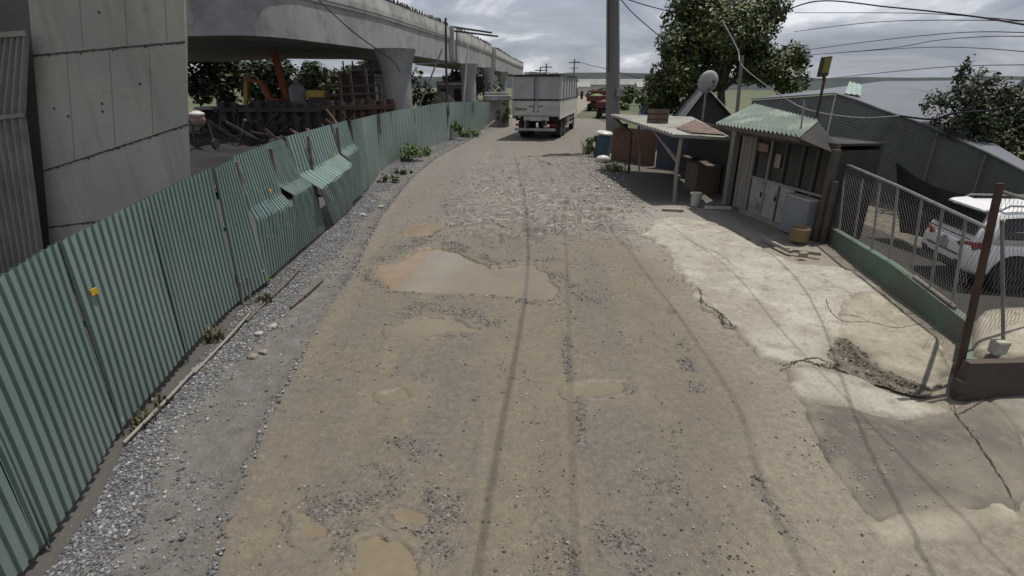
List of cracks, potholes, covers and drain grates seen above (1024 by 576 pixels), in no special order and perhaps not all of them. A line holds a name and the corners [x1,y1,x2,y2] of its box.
pothole [374,498,443,534]
pothole [372,386,419,407]
pothole [381,314,486,341]
pothole [339,525,432,576]
pothole [557,375,634,403]
pothole [367,246,564,302]
crack [697,287,732,326]
crack [950,393,1017,505]
pothole [828,338,933,397]
crack [826,293,950,369]
pothole [401,222,445,238]
